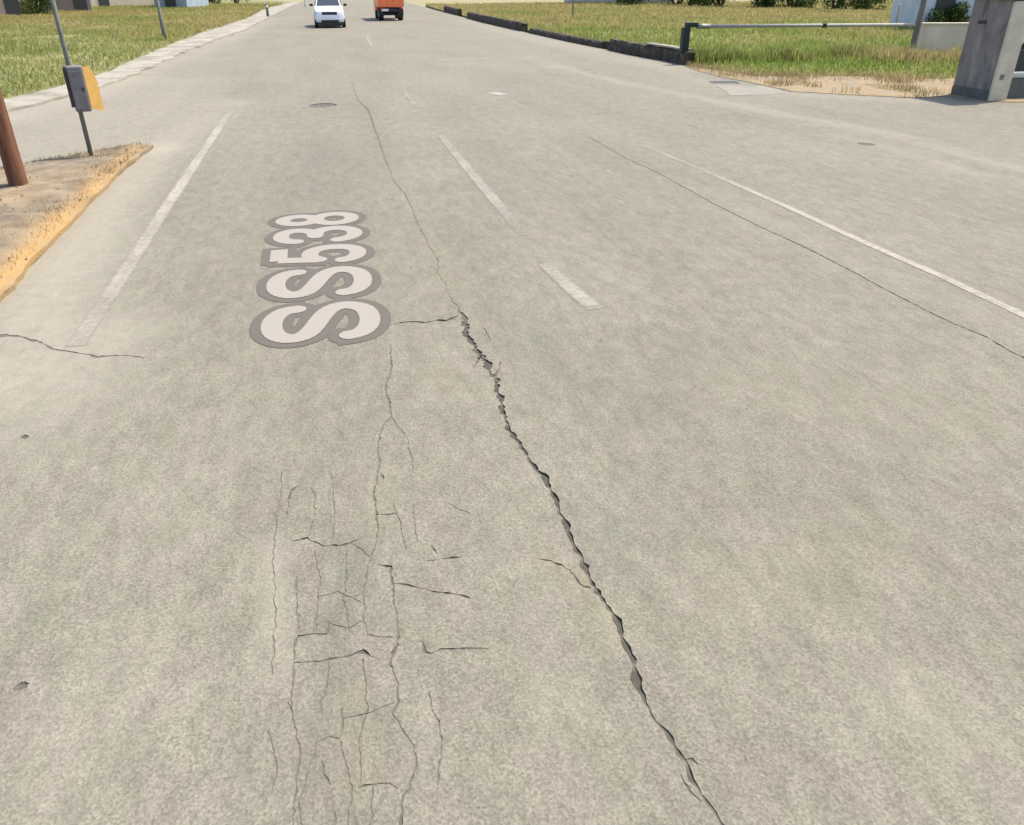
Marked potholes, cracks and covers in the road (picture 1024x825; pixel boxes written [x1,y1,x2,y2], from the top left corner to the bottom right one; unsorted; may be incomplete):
crack [0,334,145,358]
crack [268,82,724,825]
crack [591,138,1024,358]
